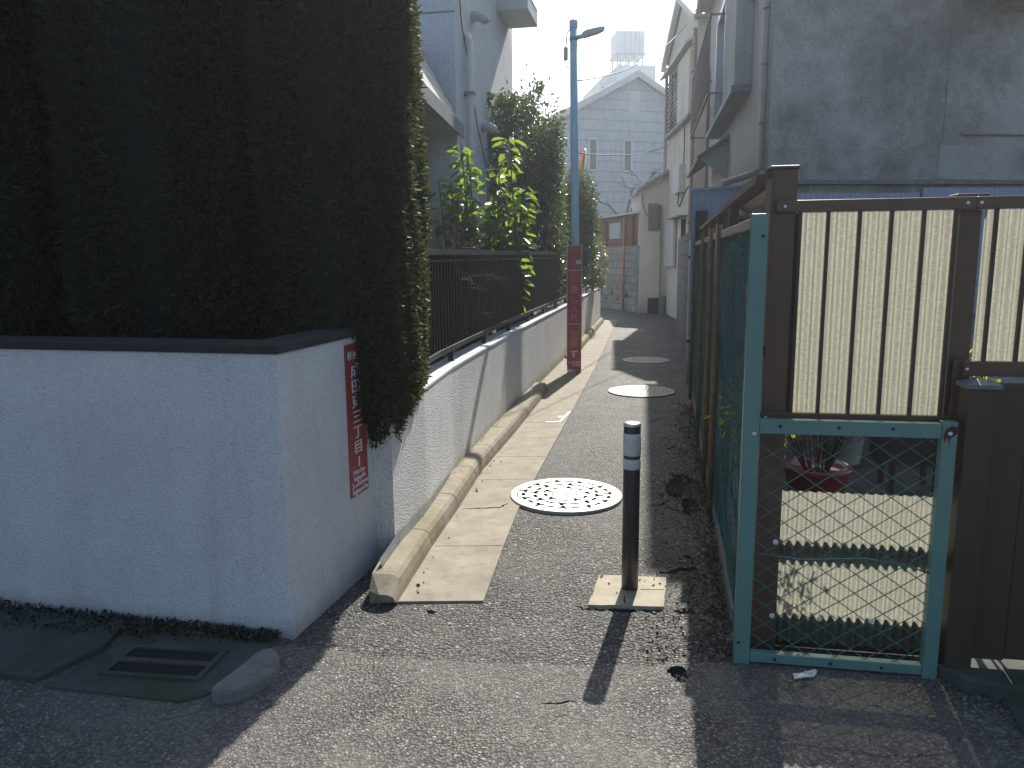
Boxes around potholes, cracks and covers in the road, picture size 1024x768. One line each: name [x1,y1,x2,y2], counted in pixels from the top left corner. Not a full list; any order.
pothole [665,474,701,498]
manhole cover [608,385,675,398]
pothole [667,665,689,682]
manhole cover [511,478,622,515]
